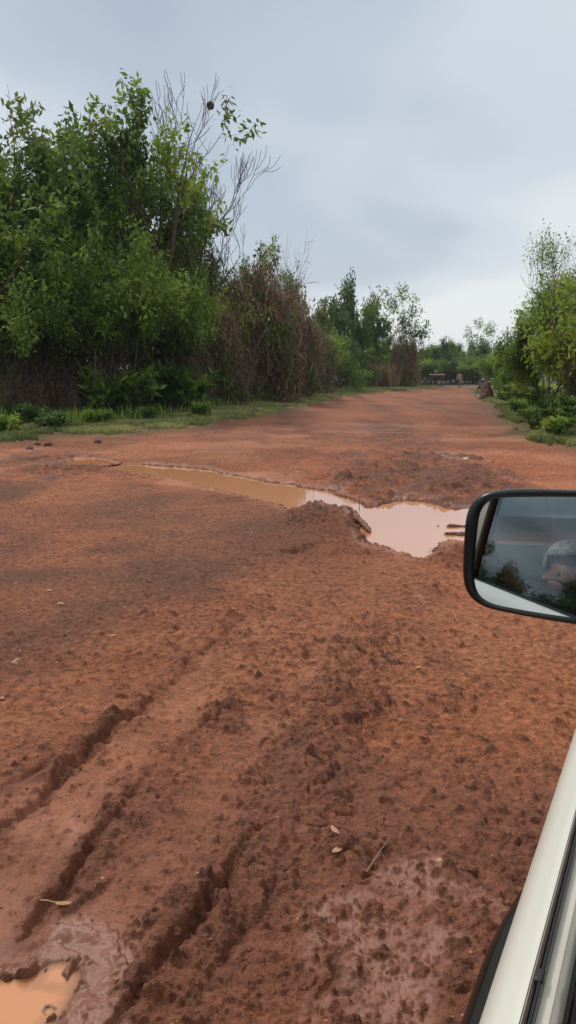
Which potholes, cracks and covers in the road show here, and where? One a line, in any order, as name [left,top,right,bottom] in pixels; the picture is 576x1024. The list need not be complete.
pothole [0,922,130,1024]
pothole [101,462,472,561]
